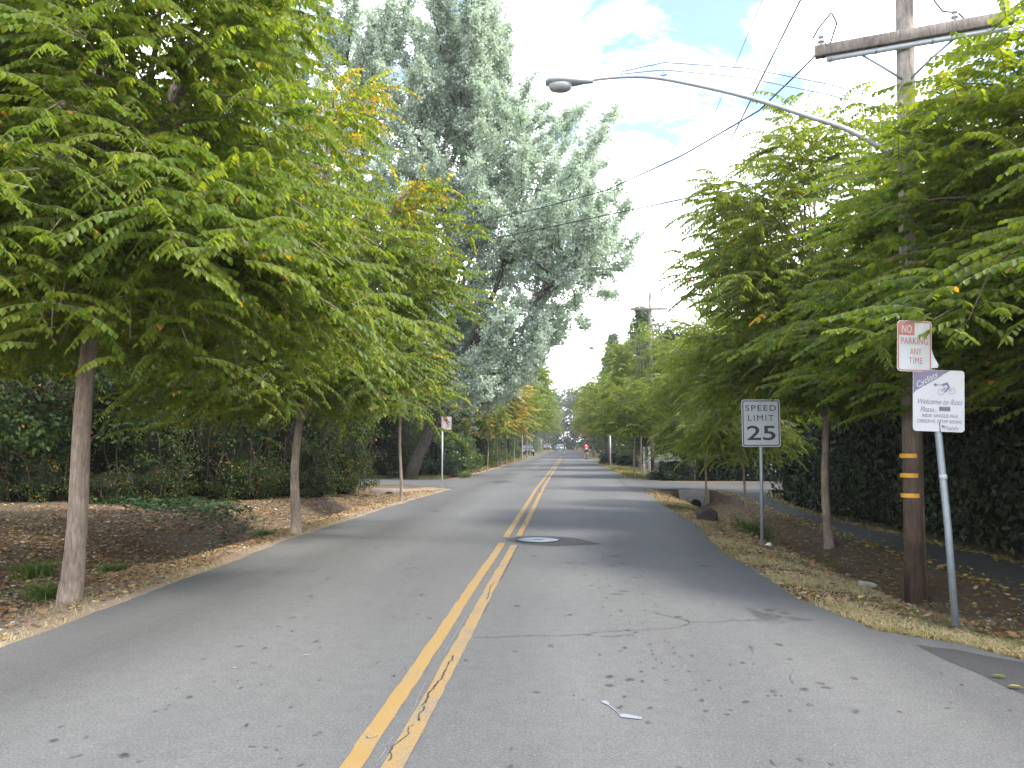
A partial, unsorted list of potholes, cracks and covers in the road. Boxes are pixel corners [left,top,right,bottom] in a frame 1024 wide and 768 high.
crack [496,603,752,637]
crack [484,514,527,611]
crack [366,655,454,761]
